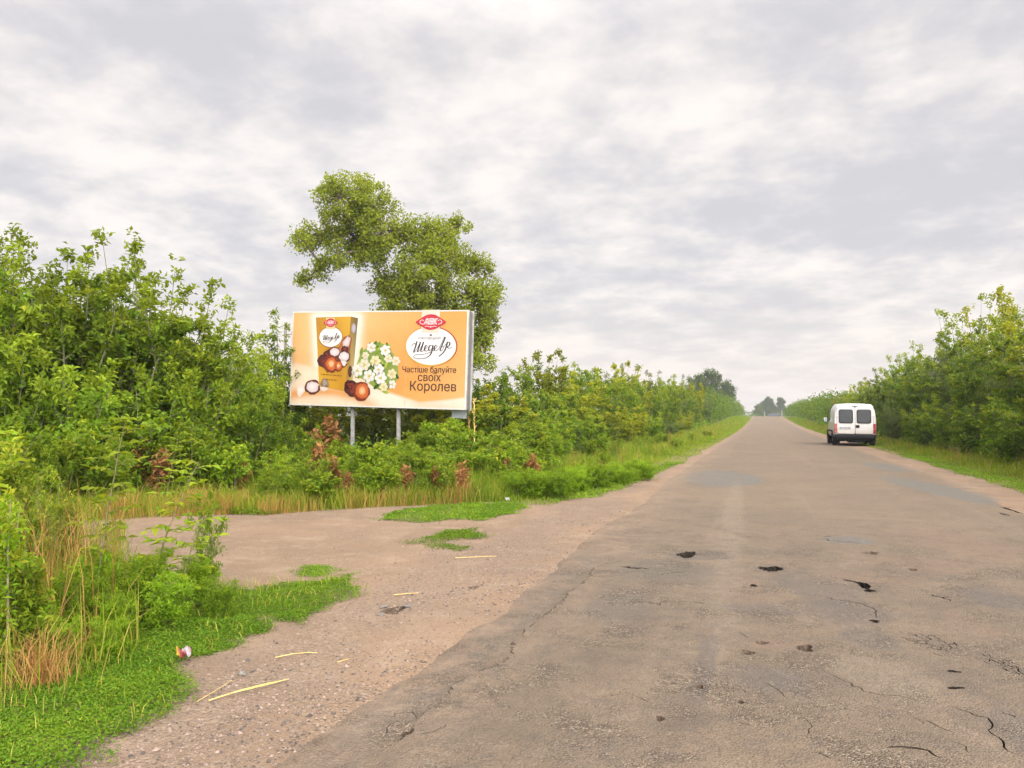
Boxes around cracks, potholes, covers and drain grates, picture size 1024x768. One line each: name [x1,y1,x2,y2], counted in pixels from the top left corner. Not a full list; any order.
crack [887,717,969,759]
pothole [382,606,406,614]
crack [823,579,877,618]
crack [901,633,958,656]
crack [958,708,1020,756]
crack [983,652,1023,675]
